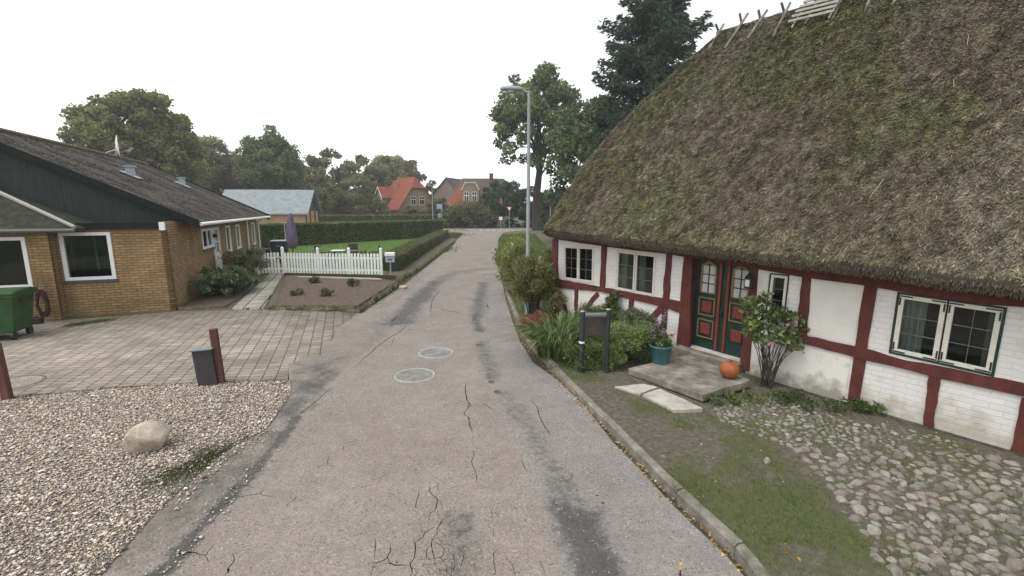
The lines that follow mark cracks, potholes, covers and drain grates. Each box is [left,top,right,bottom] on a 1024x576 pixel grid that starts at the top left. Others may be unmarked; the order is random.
crack [370,483,464,576]
manhole cover [10,375,47,389]
manhole cover [393,368,436,383]
manhole cover [417,347,454,358]
